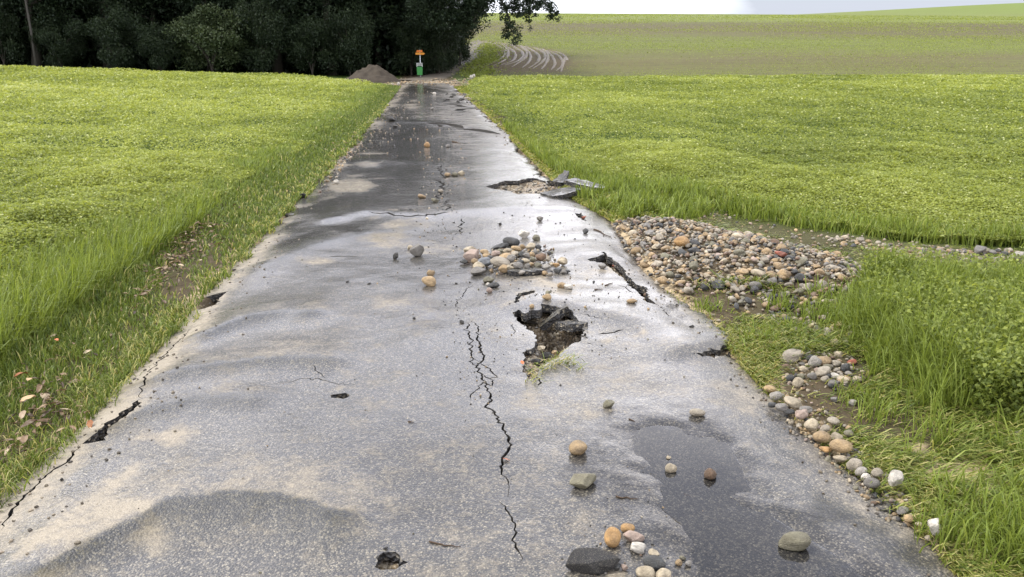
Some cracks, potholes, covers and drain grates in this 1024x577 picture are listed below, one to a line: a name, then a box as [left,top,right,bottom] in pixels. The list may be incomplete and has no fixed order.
crack [371,165,465,234]
crack [2,445,79,526]
crack [455,285,523,562]
pothole [375,552,407,570]
pothole [486,178,550,194]
pothole [490,304,593,380]
pothole [694,344,730,358]
